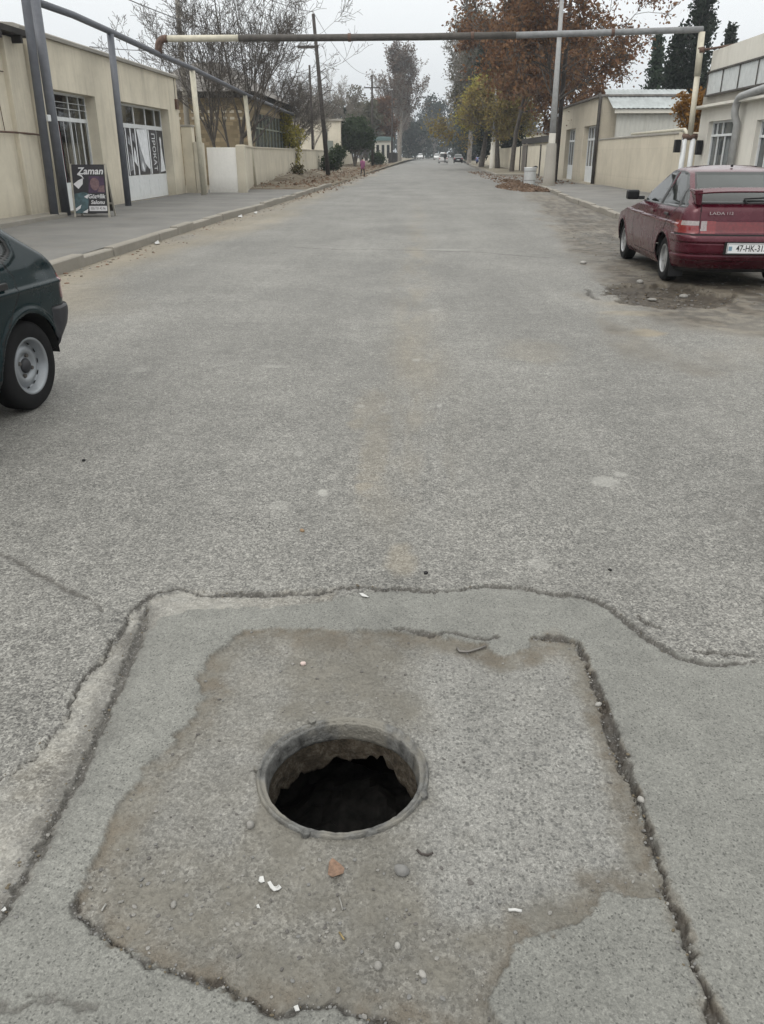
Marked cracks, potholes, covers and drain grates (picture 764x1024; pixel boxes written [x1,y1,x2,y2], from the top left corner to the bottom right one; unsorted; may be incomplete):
pothole [607,285,734,310]
crack [0,554,756,1024]
